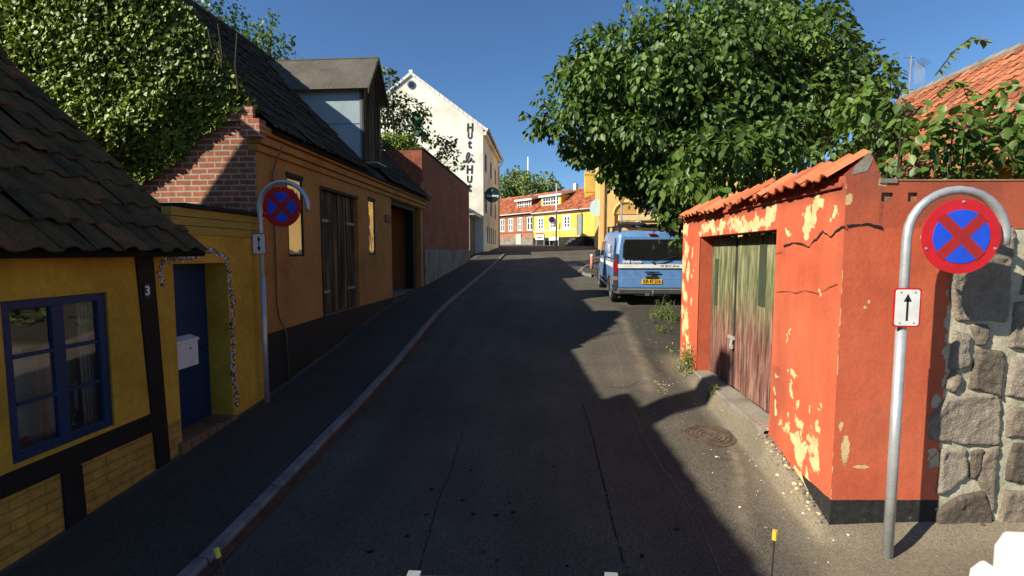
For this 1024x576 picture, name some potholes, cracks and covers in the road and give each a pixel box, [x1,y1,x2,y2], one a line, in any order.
manhole cover [681,424,737,448]
